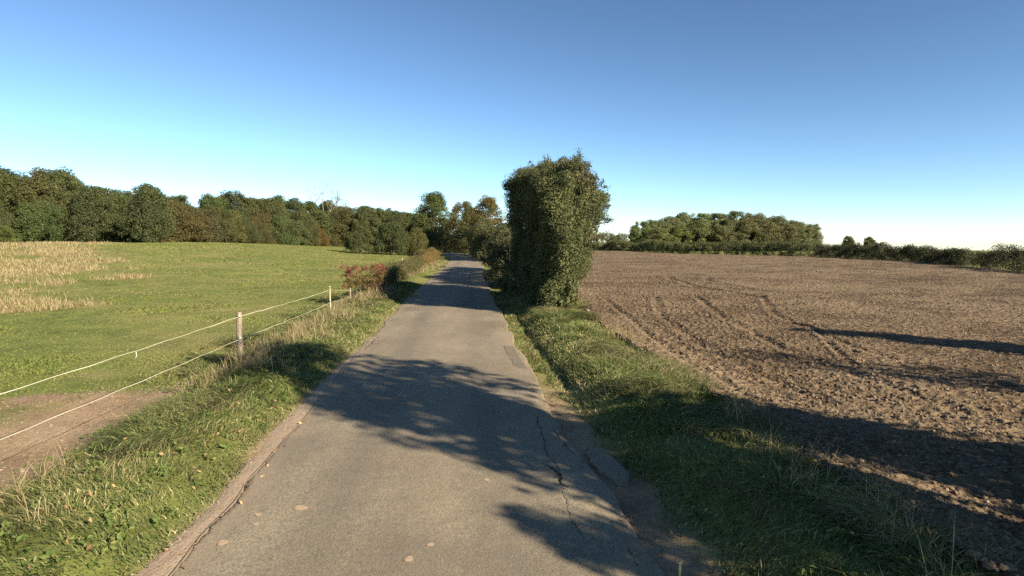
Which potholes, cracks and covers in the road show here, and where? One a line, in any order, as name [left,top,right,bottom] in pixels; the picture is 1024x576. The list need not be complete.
crack [537,416,582,536]
